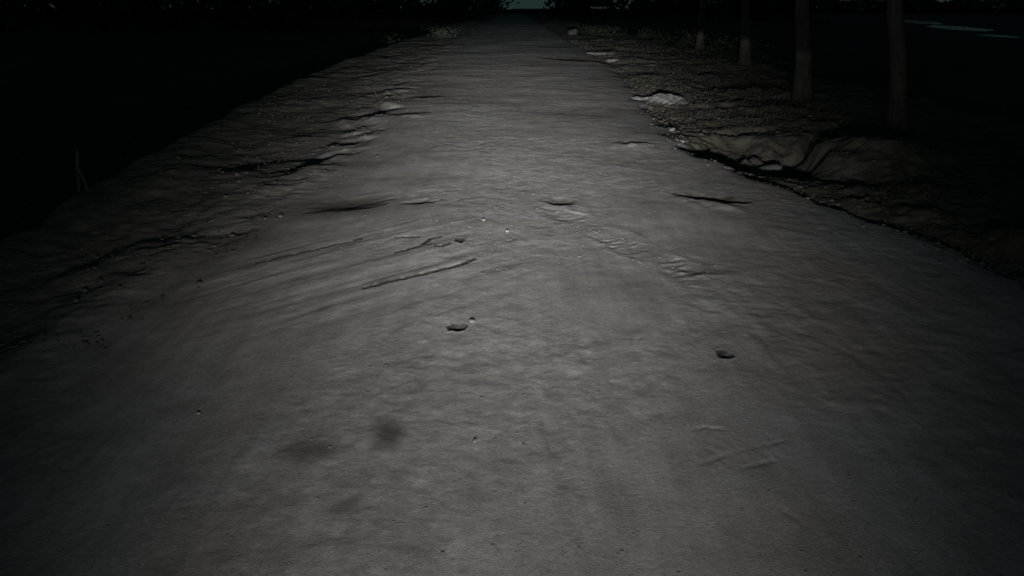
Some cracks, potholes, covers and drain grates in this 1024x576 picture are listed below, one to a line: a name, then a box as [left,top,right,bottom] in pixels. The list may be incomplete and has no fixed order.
pothole [441,321,473,334]
crack [255,236,480,291]
pothole [709,347,742,361]
pothole [536,196,583,207]
